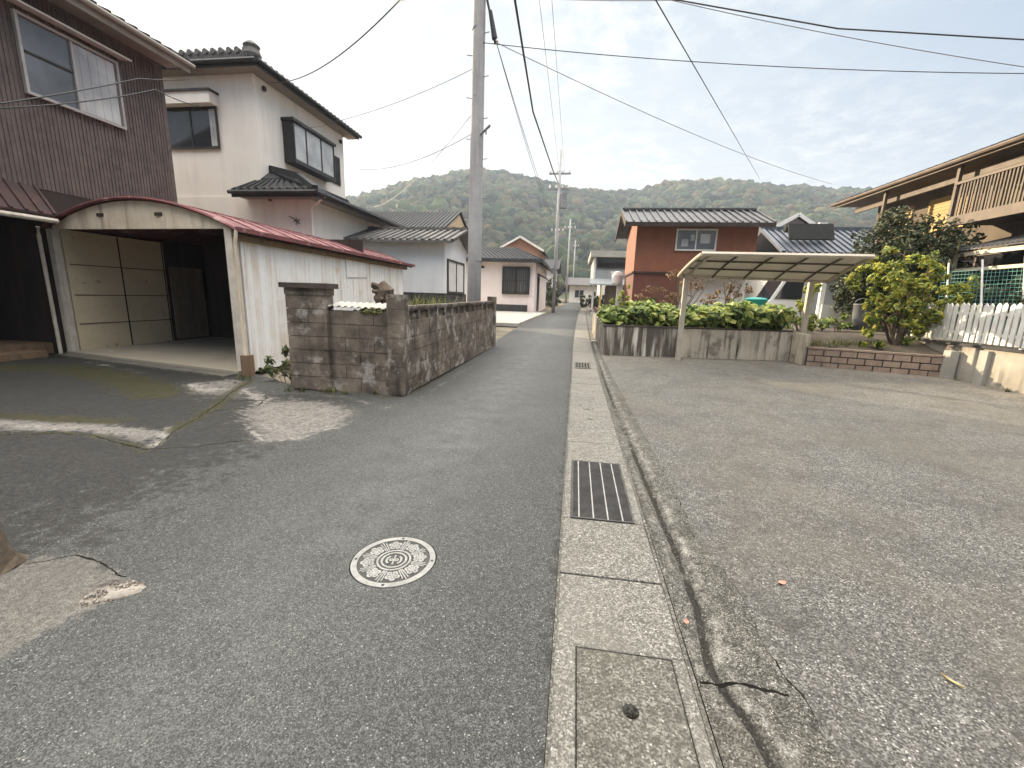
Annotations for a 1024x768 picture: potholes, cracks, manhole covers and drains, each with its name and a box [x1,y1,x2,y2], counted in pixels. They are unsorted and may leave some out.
pothole [74,579,147,608]
crack [647,440,845,767]
drain grate [571,460,635,525]
crack [28,554,127,577]
manhole cover [349,537,437,588]
